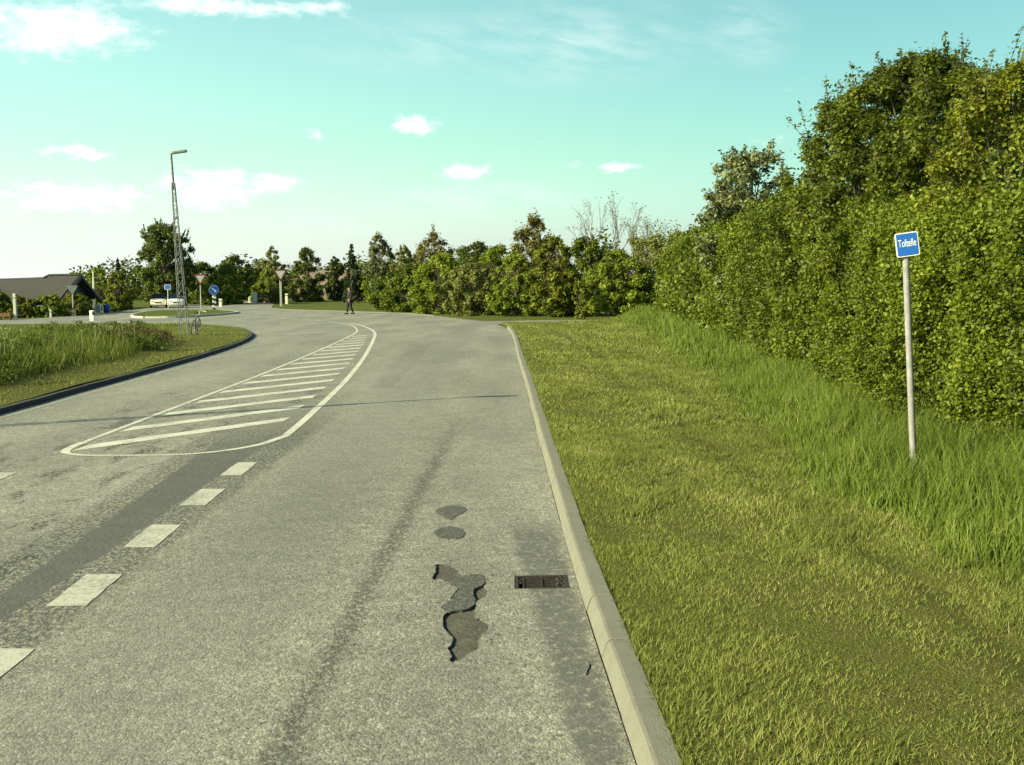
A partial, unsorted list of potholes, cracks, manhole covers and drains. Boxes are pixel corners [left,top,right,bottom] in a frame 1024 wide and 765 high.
drain grate [515,575,570,589]
pothole [432,560,518,668]
